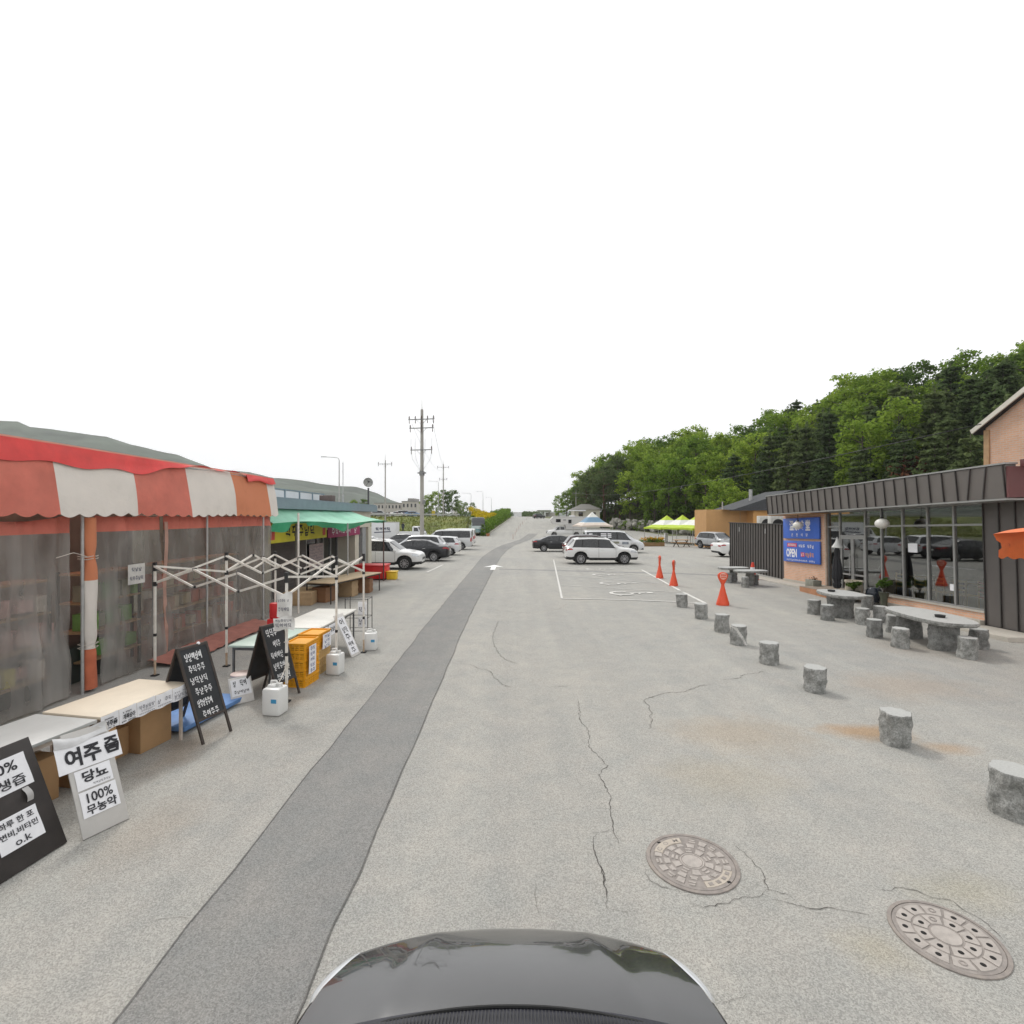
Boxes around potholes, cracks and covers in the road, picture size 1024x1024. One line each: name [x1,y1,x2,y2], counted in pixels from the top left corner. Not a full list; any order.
crack [577,700,868,915]
manhole cover [646,834,741,895]
manhole cover [887,900,1014,981]
